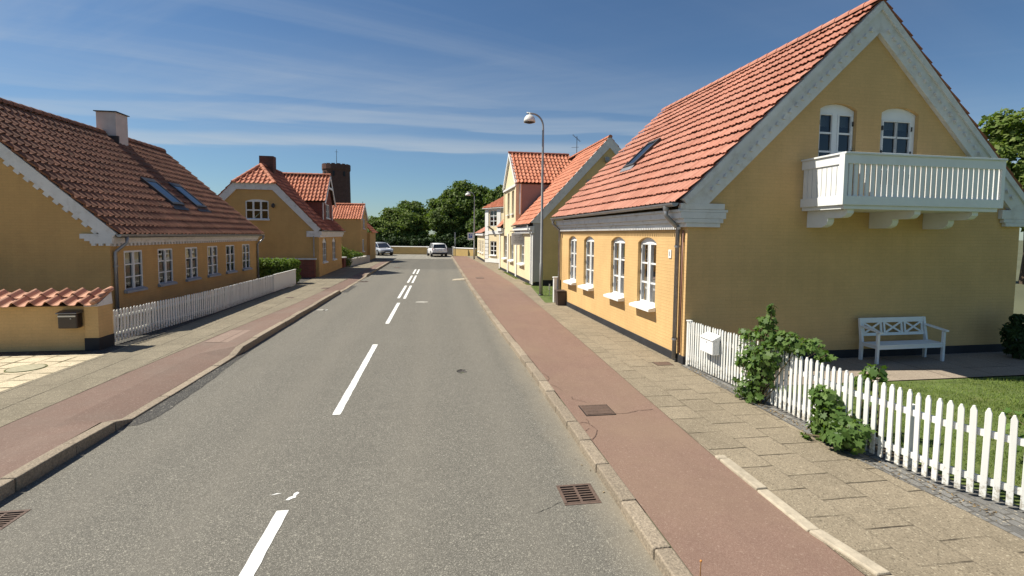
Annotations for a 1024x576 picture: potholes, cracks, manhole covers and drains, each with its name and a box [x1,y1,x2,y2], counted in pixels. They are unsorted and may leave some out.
drain grate [0,509,32,530]
utility cover [579,404,616,416]
drain grate [556,483,602,506]
manhole cover [4,364,48,373]
